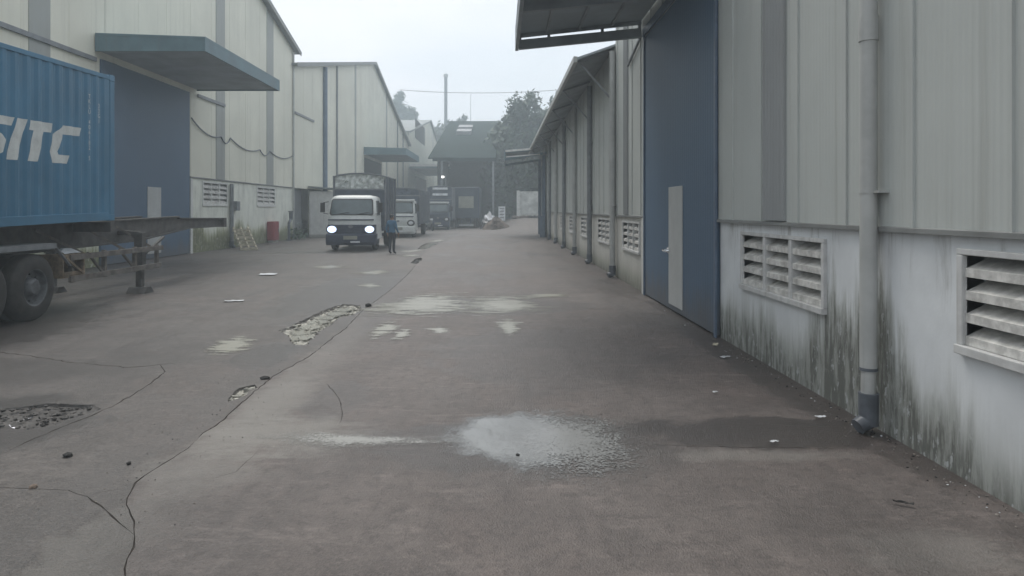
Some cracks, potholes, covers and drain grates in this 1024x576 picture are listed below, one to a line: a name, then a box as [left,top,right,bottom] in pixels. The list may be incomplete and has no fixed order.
crack [1,352,180,450]
pothole [228,385,258,402]
pothole [278,304,362,345]
pothole [0,403,101,430]
